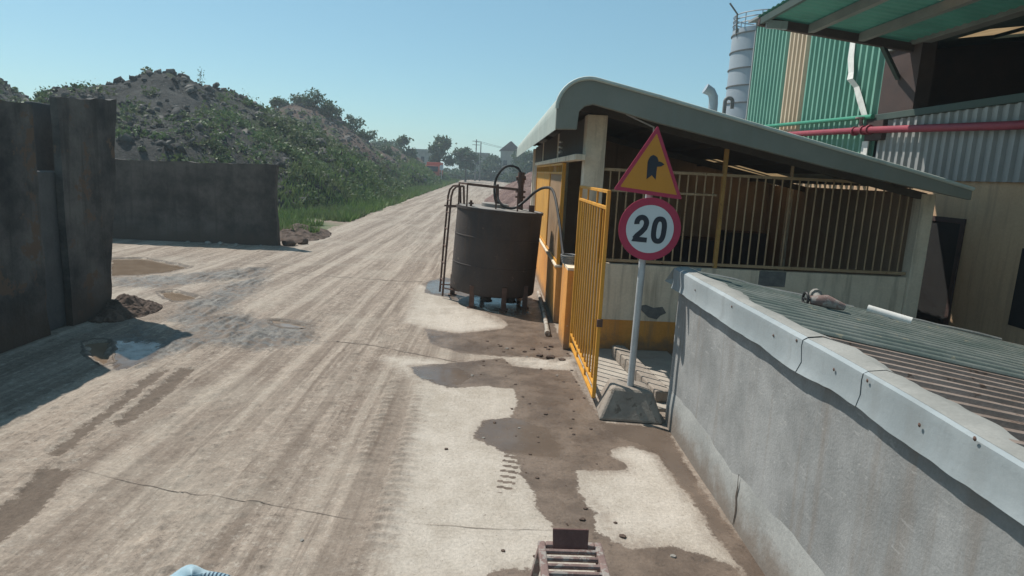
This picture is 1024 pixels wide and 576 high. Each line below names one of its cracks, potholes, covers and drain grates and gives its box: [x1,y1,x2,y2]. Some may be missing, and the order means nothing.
pothole [155,289,204,302]
pothole [79,338,118,366]
pothole [111,257,194,277]
pothole [267,318,315,329]
drain grate [530,528,610,576]
